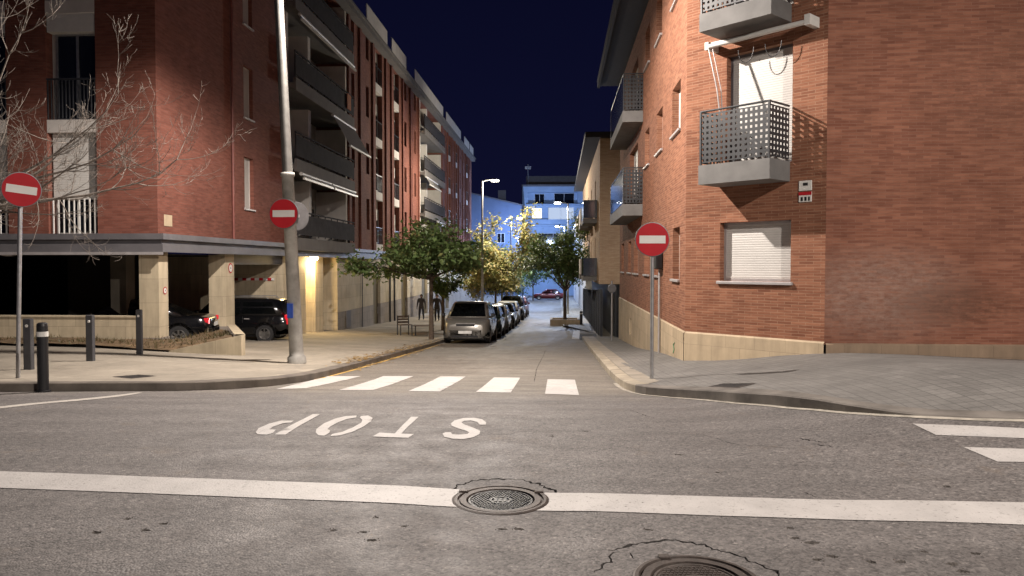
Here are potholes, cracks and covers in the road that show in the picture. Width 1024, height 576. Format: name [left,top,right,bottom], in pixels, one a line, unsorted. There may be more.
crack [594,539,780,576]
crack [453,478,557,494]
crack [697,434,832,449]
manhole cover [453,485,548,515]
manhole cover [633,554,756,576]
